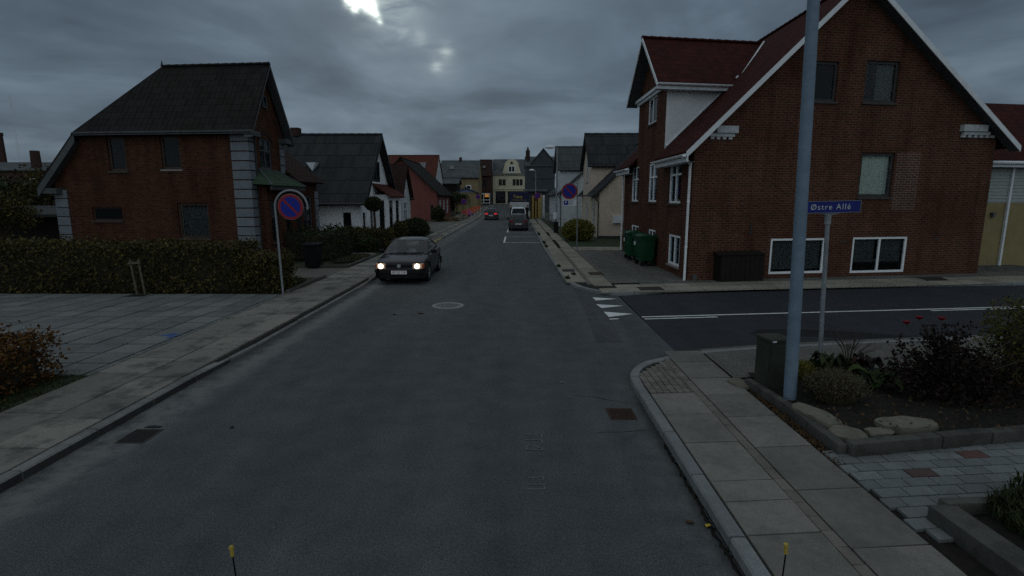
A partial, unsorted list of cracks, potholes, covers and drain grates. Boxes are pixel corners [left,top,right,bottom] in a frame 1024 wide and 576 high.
drain grate [113,429,165,444]
drain grate [606,408,638,420]
